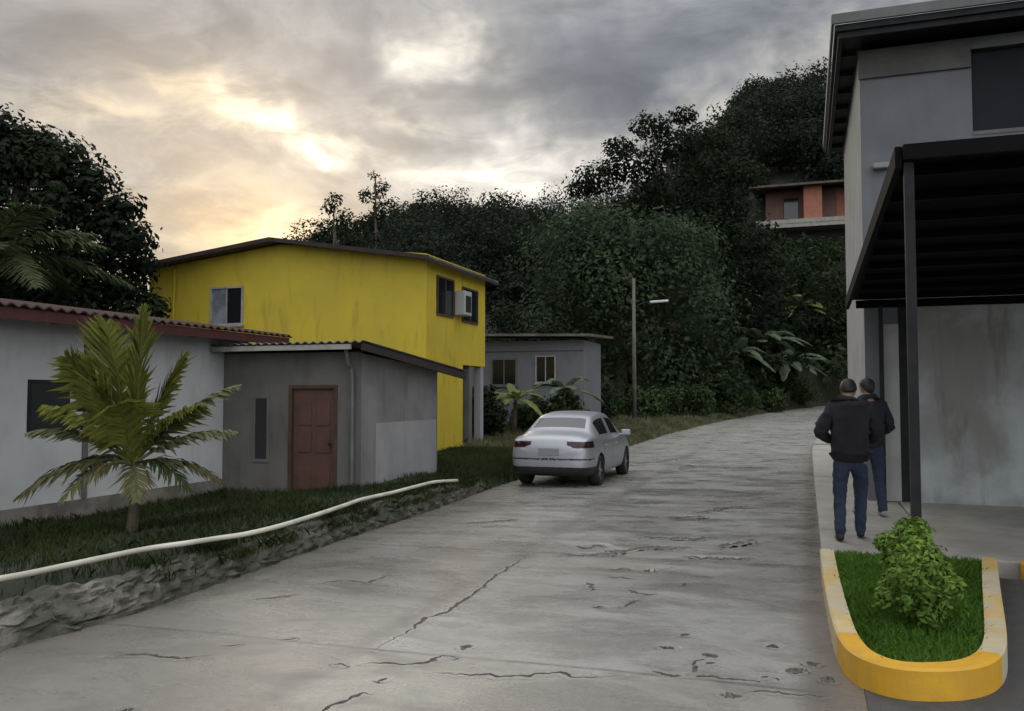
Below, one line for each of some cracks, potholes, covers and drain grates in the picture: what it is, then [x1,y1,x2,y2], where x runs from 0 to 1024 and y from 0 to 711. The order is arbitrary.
crack [245,574,395,601]
pothole [695,651,724,660]
pothole [814,674,842,685]
pothole [800,659,827,668]
pothole [778,665,815,676]
crack [105,636,298,662]
crack [313,677,393,711]
crack [422,656,836,700]
crack [557,536,758,609]
